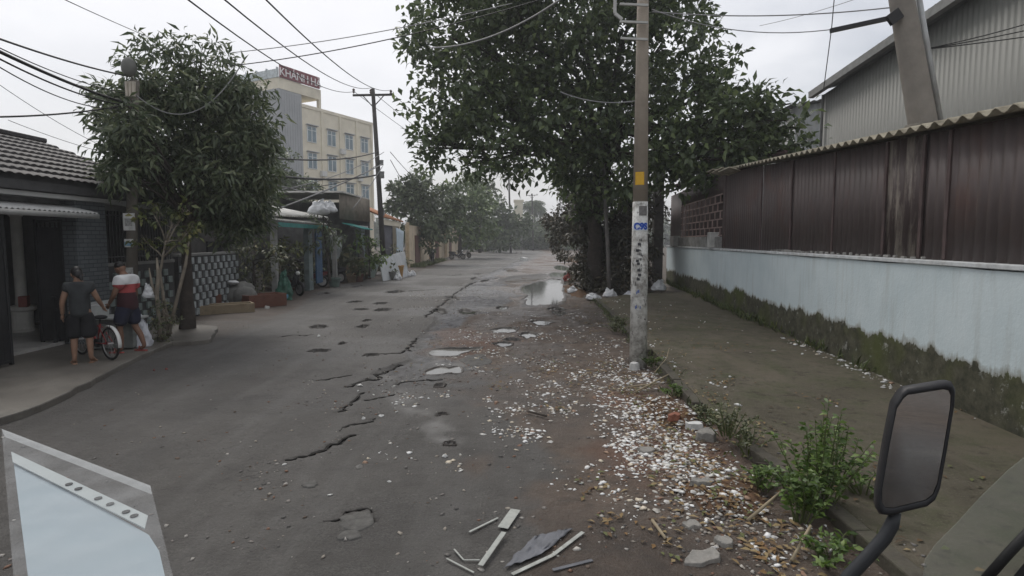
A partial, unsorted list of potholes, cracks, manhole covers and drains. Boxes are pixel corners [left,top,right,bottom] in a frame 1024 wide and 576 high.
crack [412,275,496,317]
pothole [491,340,514,348]
pothole [423,365,464,375]
pothole [518,277,567,308]
crack [285,338,443,461]
pothole [426,346,484,357]
